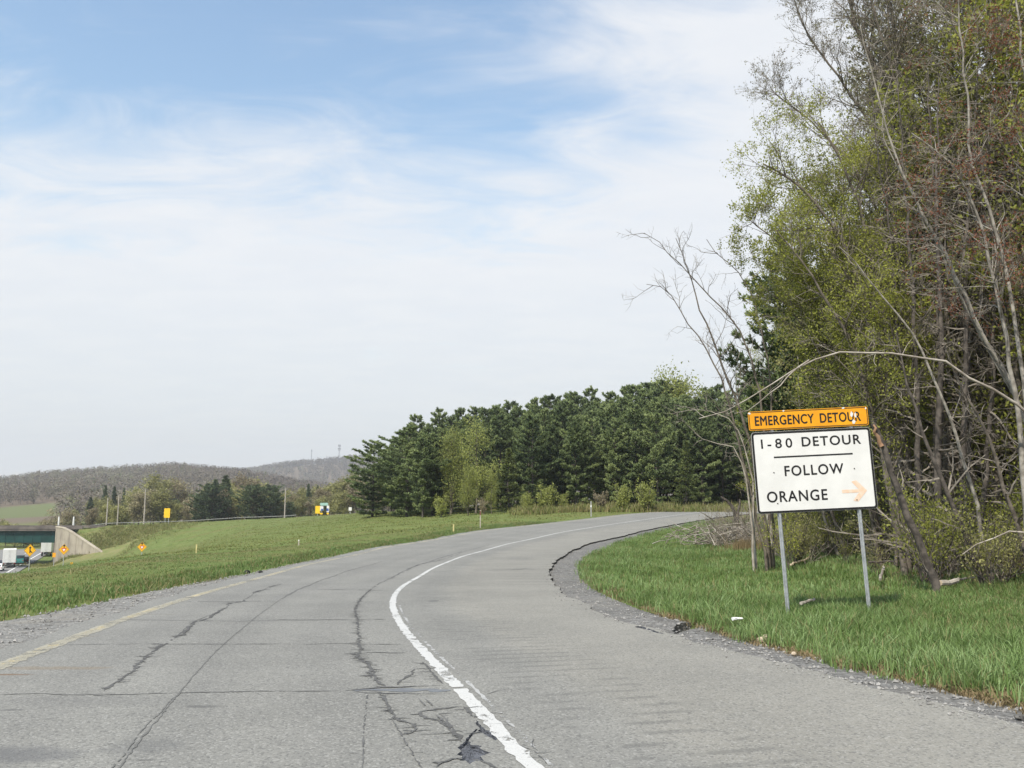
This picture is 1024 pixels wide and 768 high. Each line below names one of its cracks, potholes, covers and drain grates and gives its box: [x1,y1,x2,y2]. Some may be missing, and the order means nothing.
pothole [457,729,491,764]
crack [19,544,503,768]
